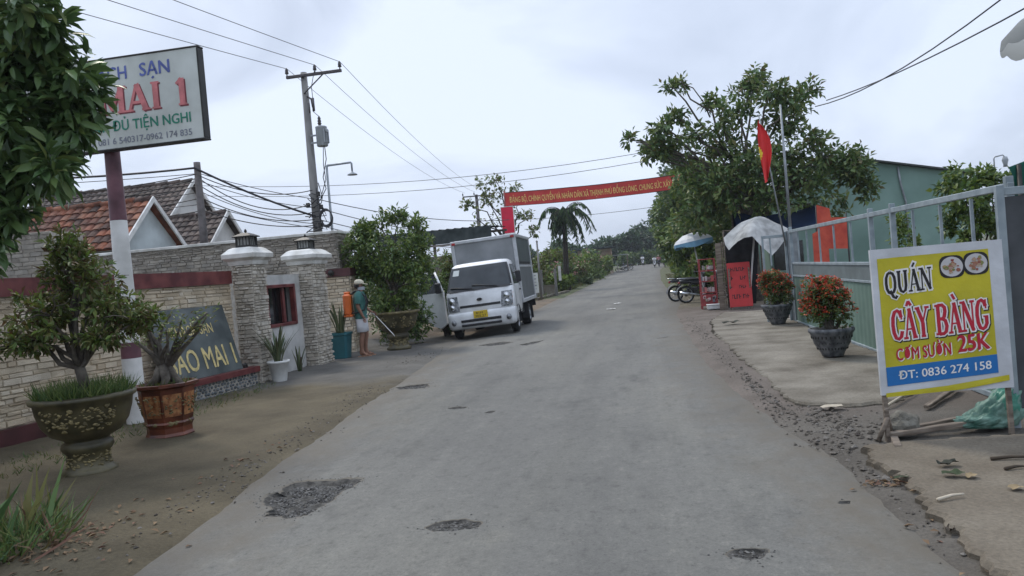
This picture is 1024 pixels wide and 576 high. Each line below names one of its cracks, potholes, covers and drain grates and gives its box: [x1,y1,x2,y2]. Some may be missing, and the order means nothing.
pothole [406,514,504,534]
pothole [253,475,378,522]
pothole [708,543,783,567]
